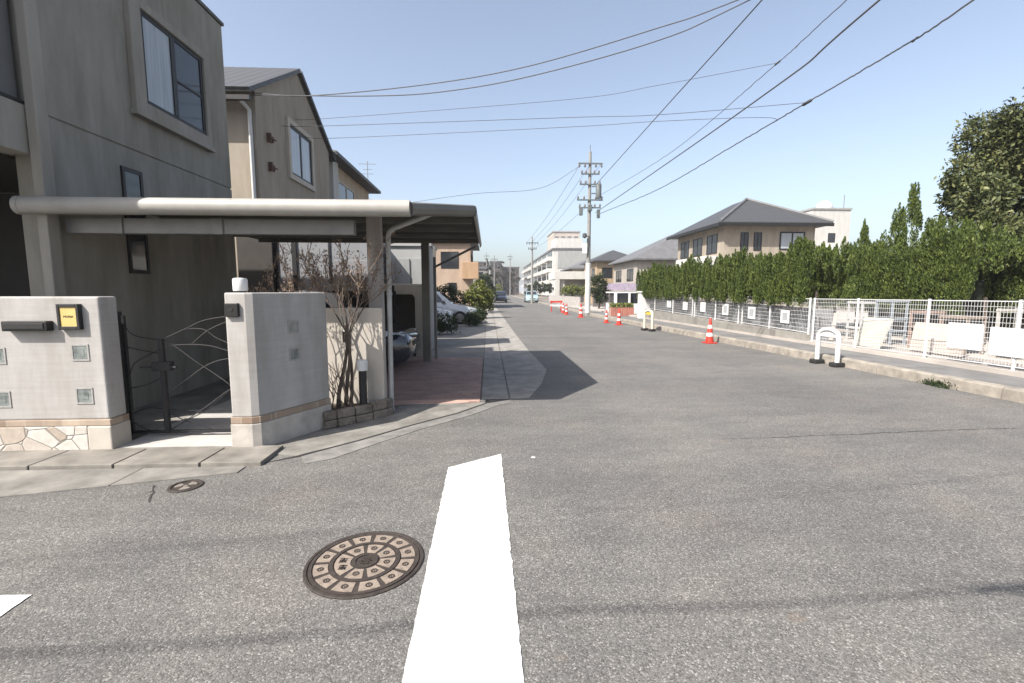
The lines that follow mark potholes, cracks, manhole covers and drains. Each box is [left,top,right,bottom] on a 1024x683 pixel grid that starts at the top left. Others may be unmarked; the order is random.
crack [740,428,1013,439]
manhole cover [167,479,204,493]
manhole cover [302,531,424,600]
